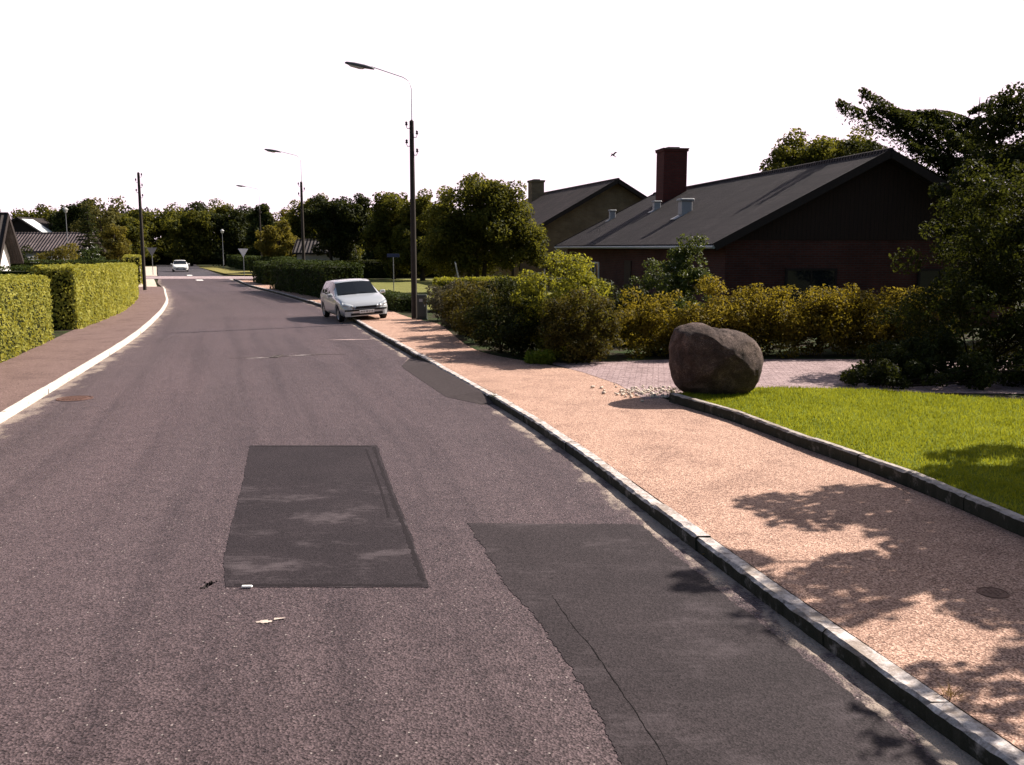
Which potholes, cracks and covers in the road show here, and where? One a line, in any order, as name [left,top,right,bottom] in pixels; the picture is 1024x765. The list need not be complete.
crack [552,595,668,765]
utility cover [976,587,1010,599]
